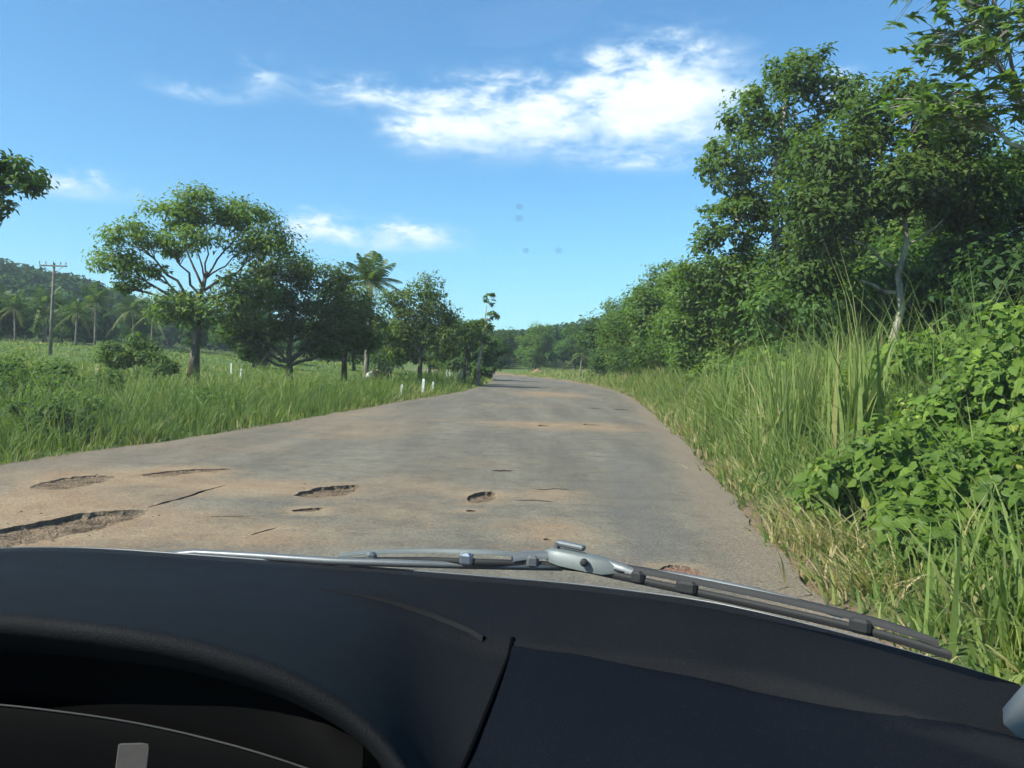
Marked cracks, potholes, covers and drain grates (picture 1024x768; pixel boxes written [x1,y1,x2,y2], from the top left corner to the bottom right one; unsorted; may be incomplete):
pothole [0,506,160,547]
pothole [659,564,704,575]
crack [147,485,278,535]
pothole [132,466,235,479]
crack [516,488,568,502]
pothole [455,489,498,504]
pothole [27,474,130,492]
pothole [289,482,371,501]
